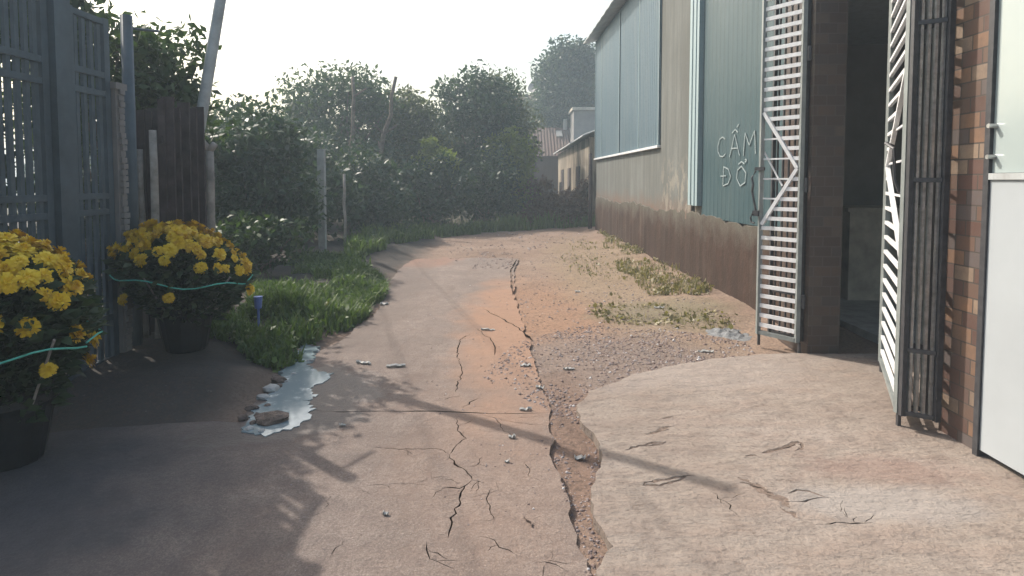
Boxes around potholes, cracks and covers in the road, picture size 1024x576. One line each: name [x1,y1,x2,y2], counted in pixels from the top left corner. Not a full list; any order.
crack [364,311,531,567]
